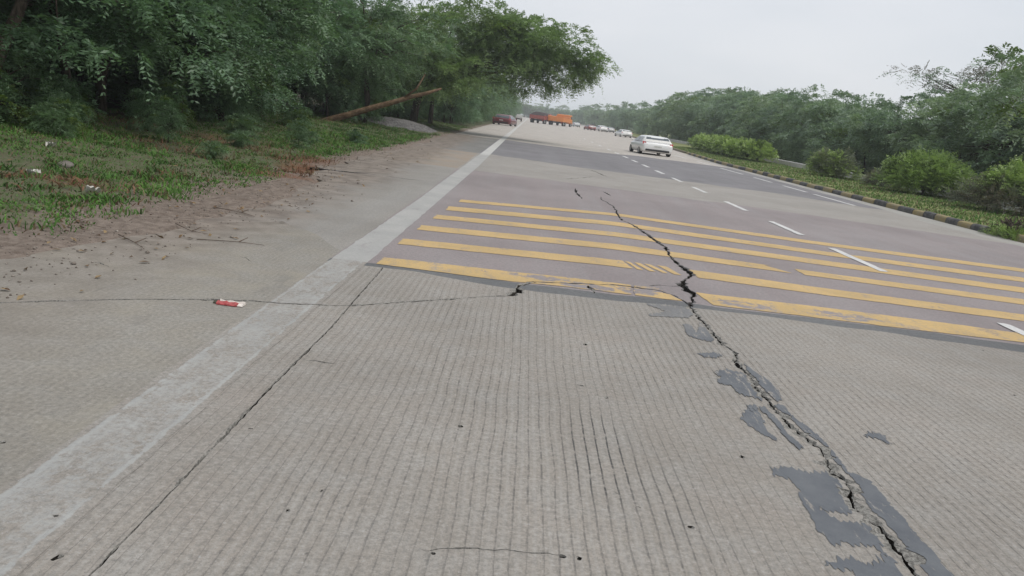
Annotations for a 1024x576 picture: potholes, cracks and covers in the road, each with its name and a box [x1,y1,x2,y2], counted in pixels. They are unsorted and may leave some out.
crack [0,192,927,576]
